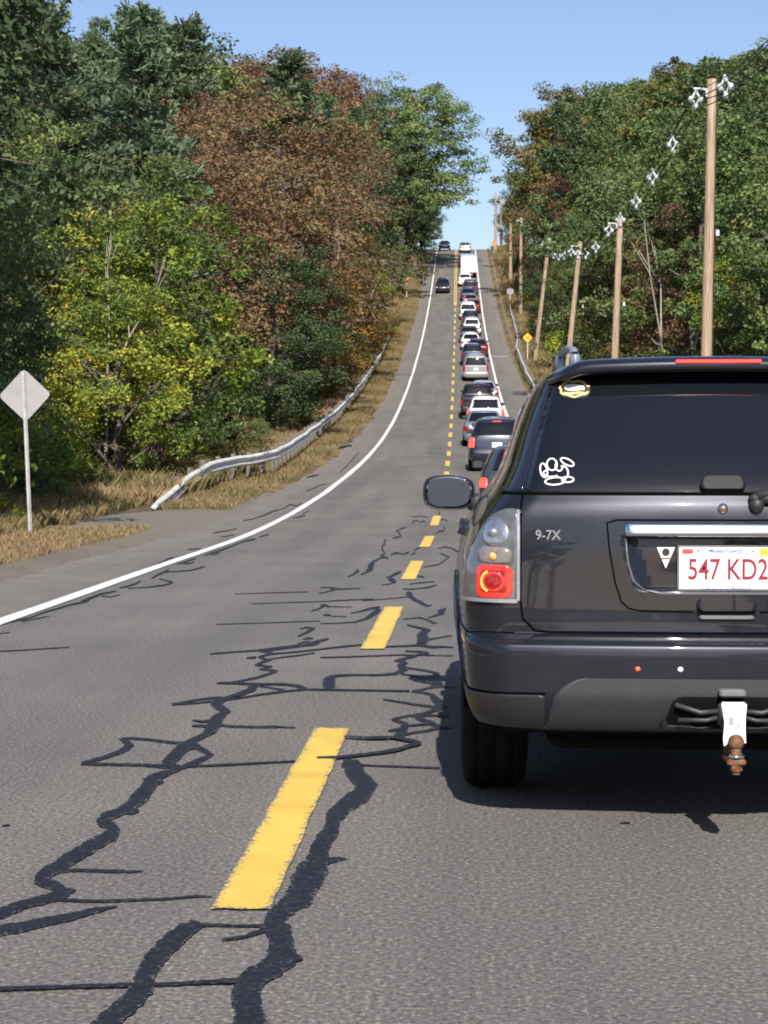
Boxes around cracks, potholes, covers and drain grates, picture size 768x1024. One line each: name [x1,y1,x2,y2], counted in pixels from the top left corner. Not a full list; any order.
crack [0,632,69,652]
crack [239,591,329,604]
